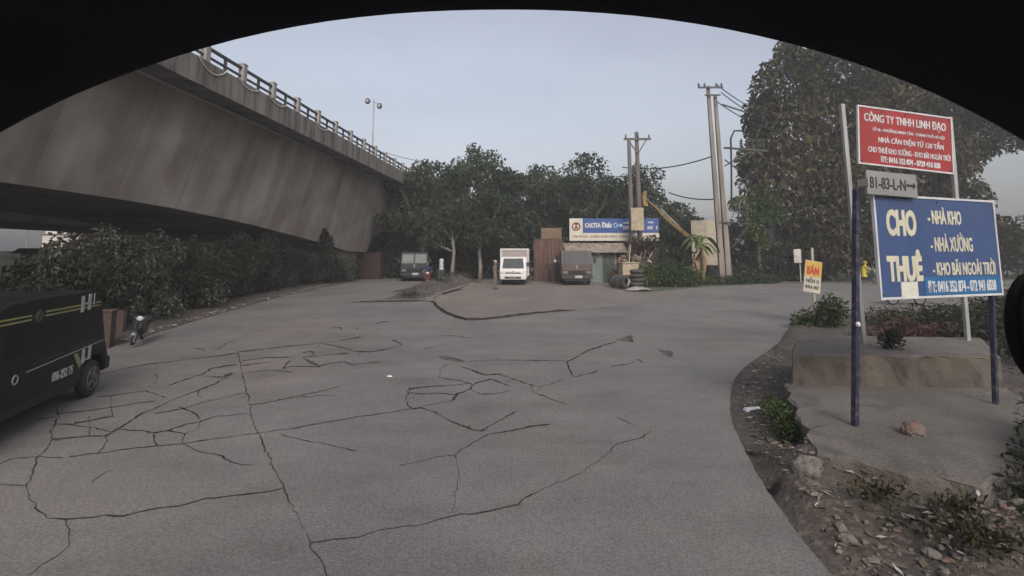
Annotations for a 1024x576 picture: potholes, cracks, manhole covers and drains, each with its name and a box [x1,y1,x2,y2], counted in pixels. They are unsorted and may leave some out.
crack [0,327,651,576]
crack [352,281,576,349]
